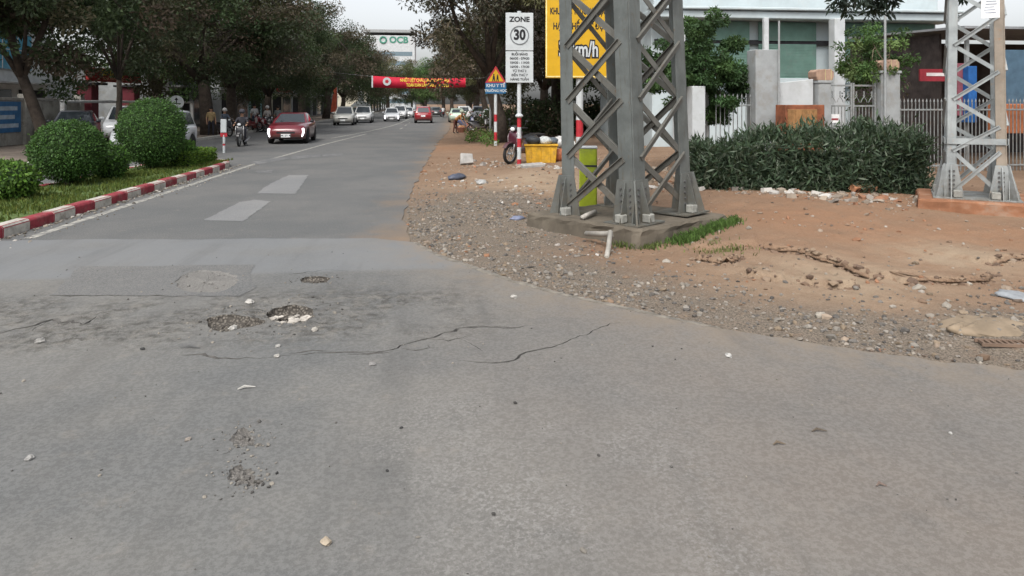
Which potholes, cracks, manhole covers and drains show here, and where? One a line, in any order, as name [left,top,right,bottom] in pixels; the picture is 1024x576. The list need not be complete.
crack [0,317,96,334]
pothole [227,464,265,487]
pothole [266,305,315,323]
pothole [229,427,256,447]
pothole [205,314,265,332]
crack [187,322,620,364]
